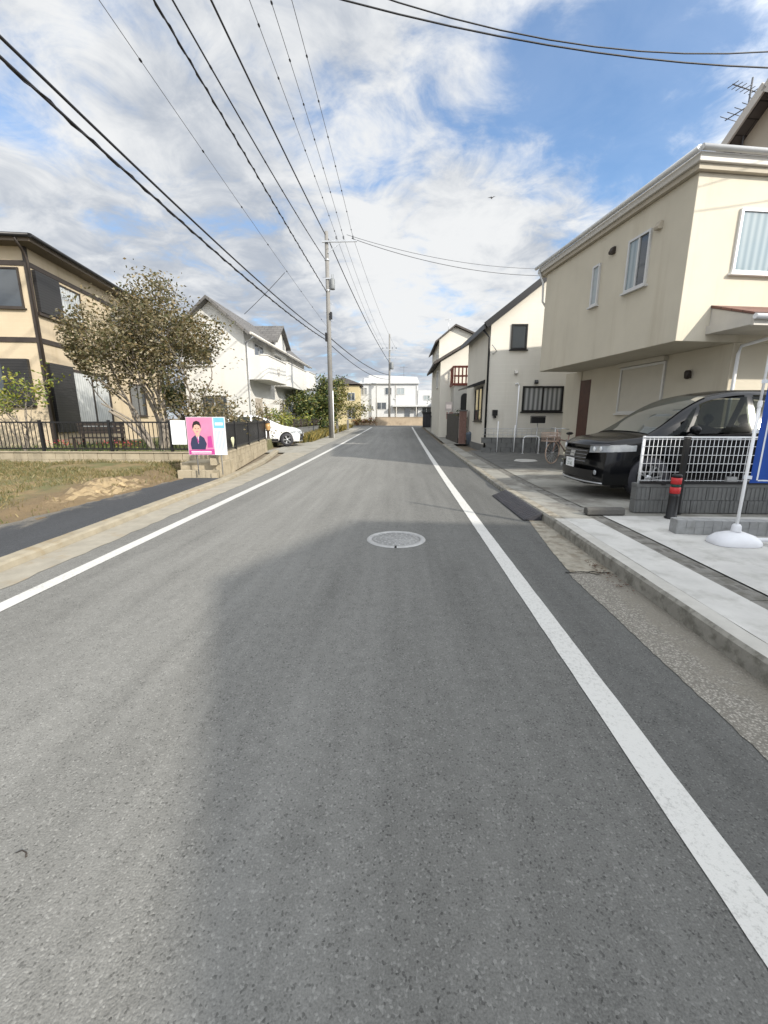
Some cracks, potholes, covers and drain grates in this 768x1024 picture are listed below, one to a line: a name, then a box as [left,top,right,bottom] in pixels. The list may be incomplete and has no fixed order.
manhole cover [367,531,425,548]
